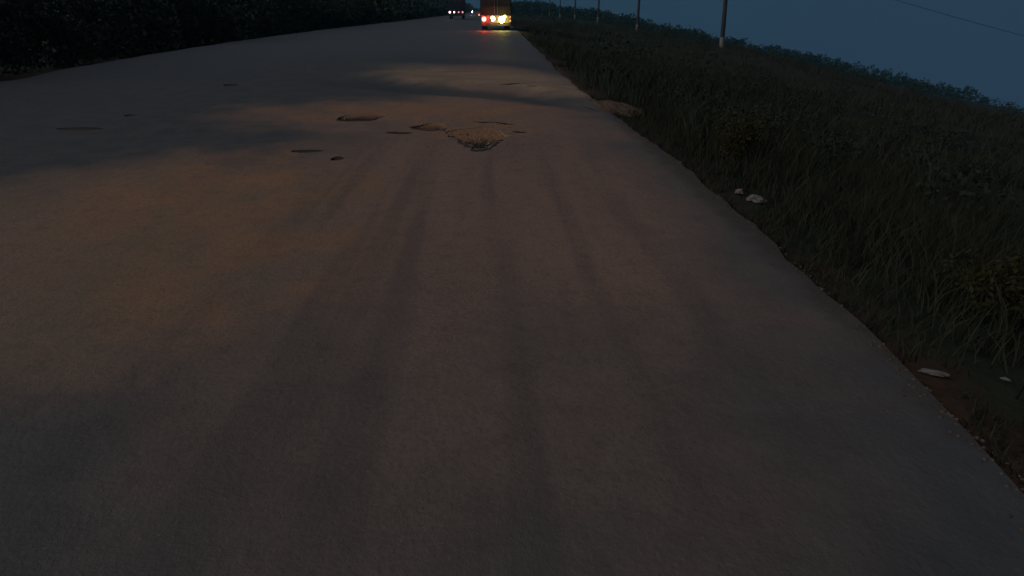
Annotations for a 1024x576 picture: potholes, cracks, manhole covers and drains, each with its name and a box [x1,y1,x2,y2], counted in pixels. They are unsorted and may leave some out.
pothole [410,123,447,132]
pothole [446,128,508,152]
pothole [336,114,385,122]
